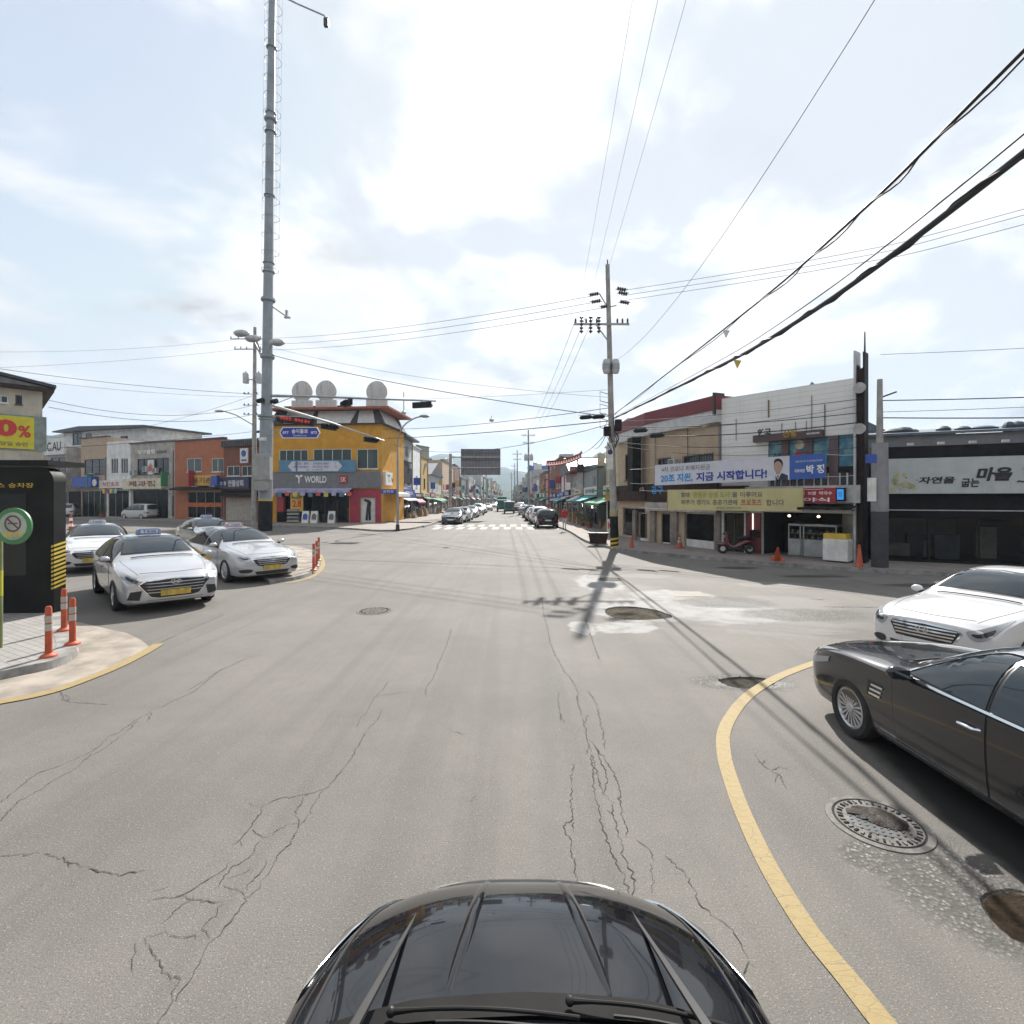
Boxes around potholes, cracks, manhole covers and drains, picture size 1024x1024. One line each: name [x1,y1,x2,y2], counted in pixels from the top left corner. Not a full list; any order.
manhole cover [824,795,938,855]
pothole [980,888,1024,944]
pothole [605,605,672,620]
pothole [718,676,775,689]
crack [1,852,145,875]
crack [0,657,249,821]
crack [132,631,452,1024]
manhole cover [356,607,393,615]
crack [542,603,756,974]
